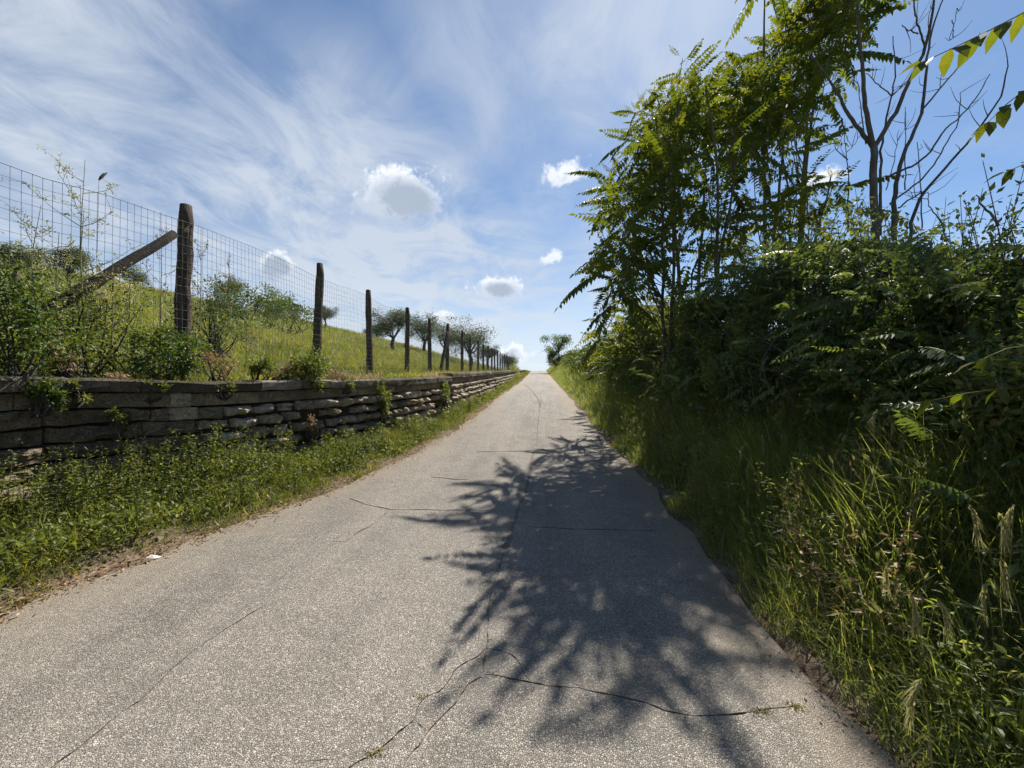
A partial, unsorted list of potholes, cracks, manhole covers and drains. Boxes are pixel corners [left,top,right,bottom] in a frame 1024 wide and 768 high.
crack [51,605,266,768]
